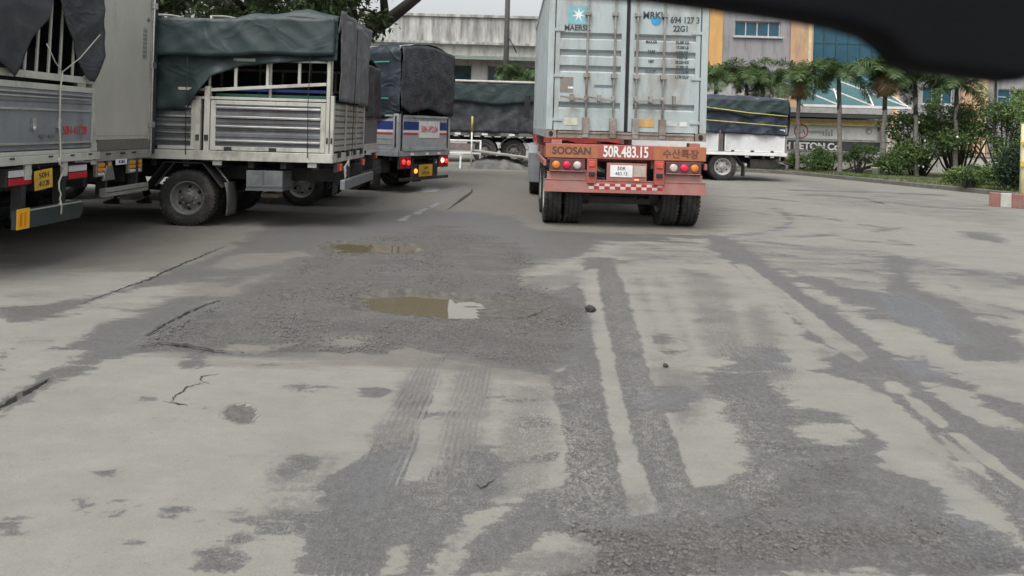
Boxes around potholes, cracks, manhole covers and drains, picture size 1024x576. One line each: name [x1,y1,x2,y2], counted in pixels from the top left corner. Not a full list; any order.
pothole [334,288,556,322]
pothole [218,402,260,425]
crack [164,373,219,405]
pothole [315,240,459,255]
